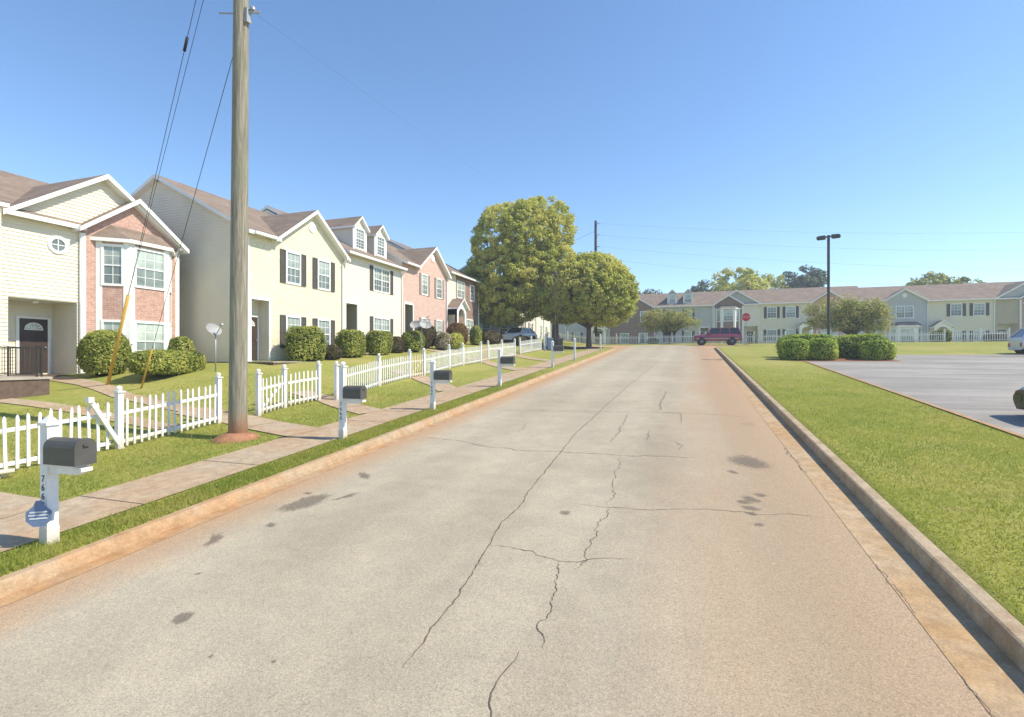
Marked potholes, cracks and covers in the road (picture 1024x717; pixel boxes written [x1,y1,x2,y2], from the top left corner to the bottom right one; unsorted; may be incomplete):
crack [489,652,519,717]
crack [403,352,822,666]
